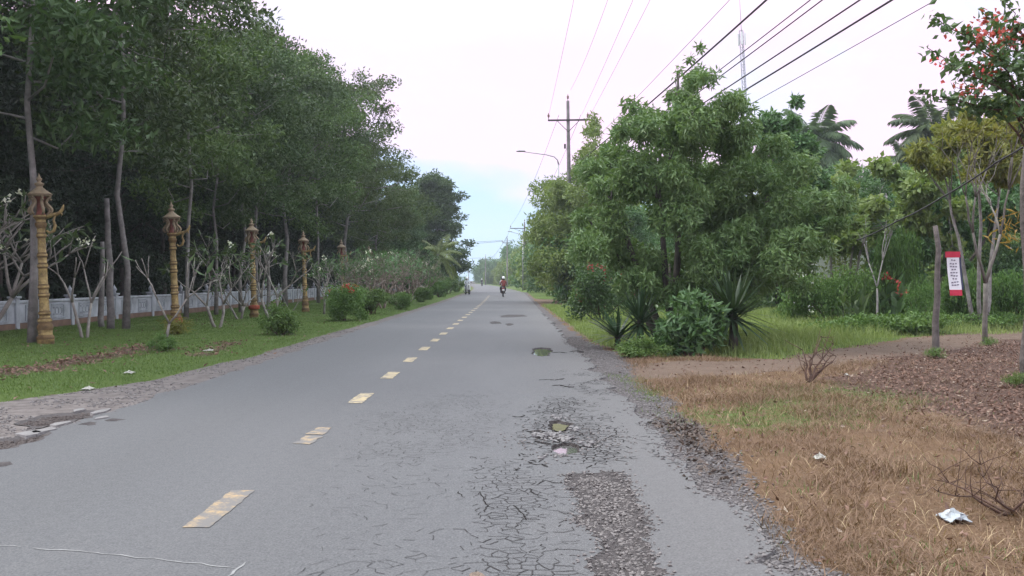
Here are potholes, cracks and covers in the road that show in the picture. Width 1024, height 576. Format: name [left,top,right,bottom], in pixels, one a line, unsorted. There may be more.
pothole [551,443,582,454]
pothole [548,420,574,433]
pothole [531,347,553,357]
pothole [14,410,97,429]
crack [298,370,676,576]
